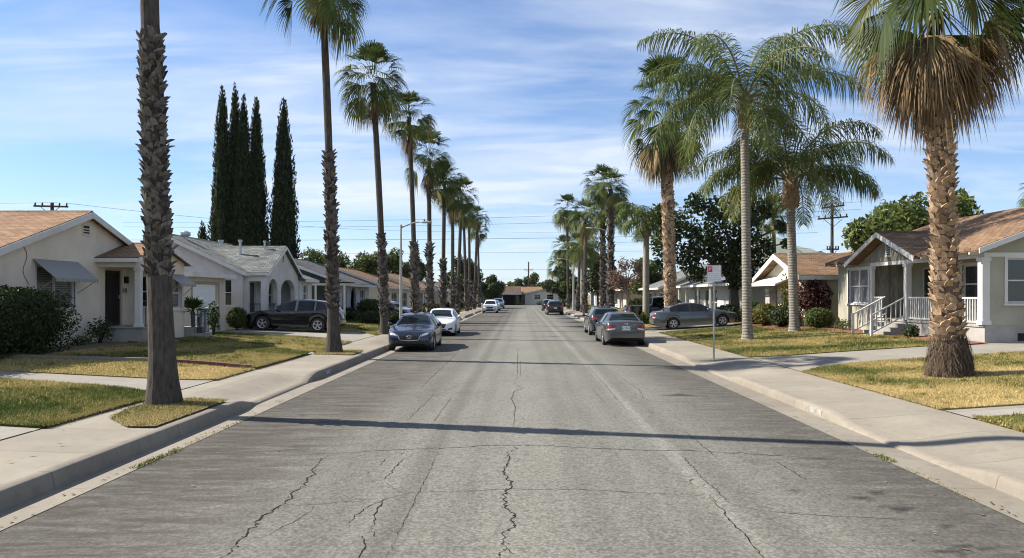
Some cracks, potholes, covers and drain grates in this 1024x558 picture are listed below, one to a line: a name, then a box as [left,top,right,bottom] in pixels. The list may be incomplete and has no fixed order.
crack [408,355,696,422]
crack [429,432,913,558]
crack [341,453,403,558]
crack [220,455,376,558]
